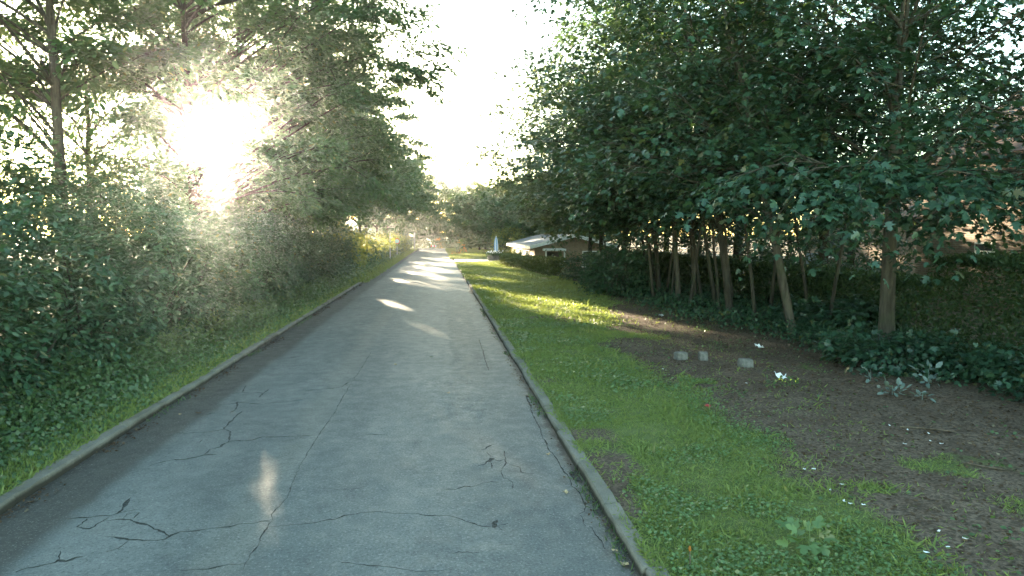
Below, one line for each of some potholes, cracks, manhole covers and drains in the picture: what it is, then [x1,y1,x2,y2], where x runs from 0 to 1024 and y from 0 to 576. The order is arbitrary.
crack [68,497,261,552]
crack [273,511,505,530]
crack [153,386,310,465]
crack [525,395,605,549]
crack [16,551,83,572]
crack [454,444,531,490]
